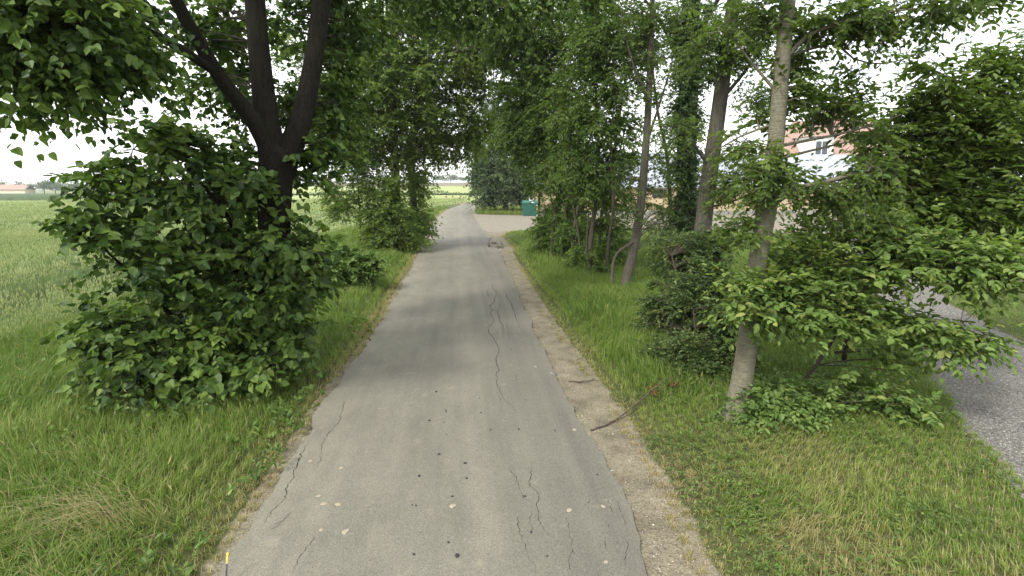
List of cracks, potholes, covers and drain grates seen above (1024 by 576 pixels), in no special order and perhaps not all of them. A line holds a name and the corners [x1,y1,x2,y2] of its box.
crack [508,465,580,571]
crack [264,403,345,523]
crack [486,286,521,406]
